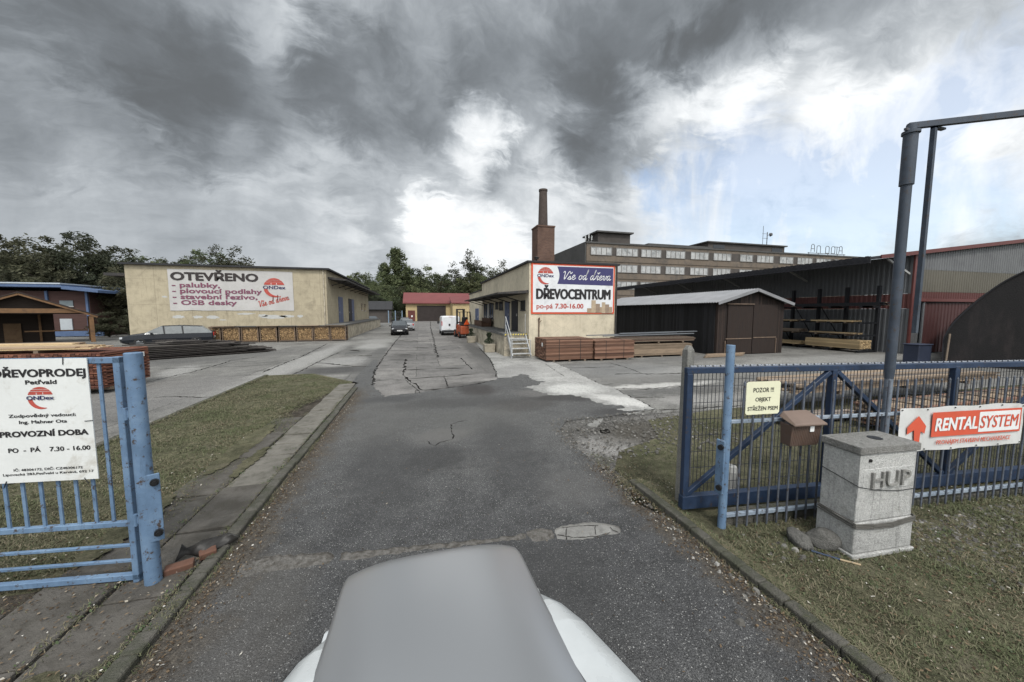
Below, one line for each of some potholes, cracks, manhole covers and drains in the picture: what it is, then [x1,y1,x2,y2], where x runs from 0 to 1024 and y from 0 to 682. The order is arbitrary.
crack [158,322,497,393]
